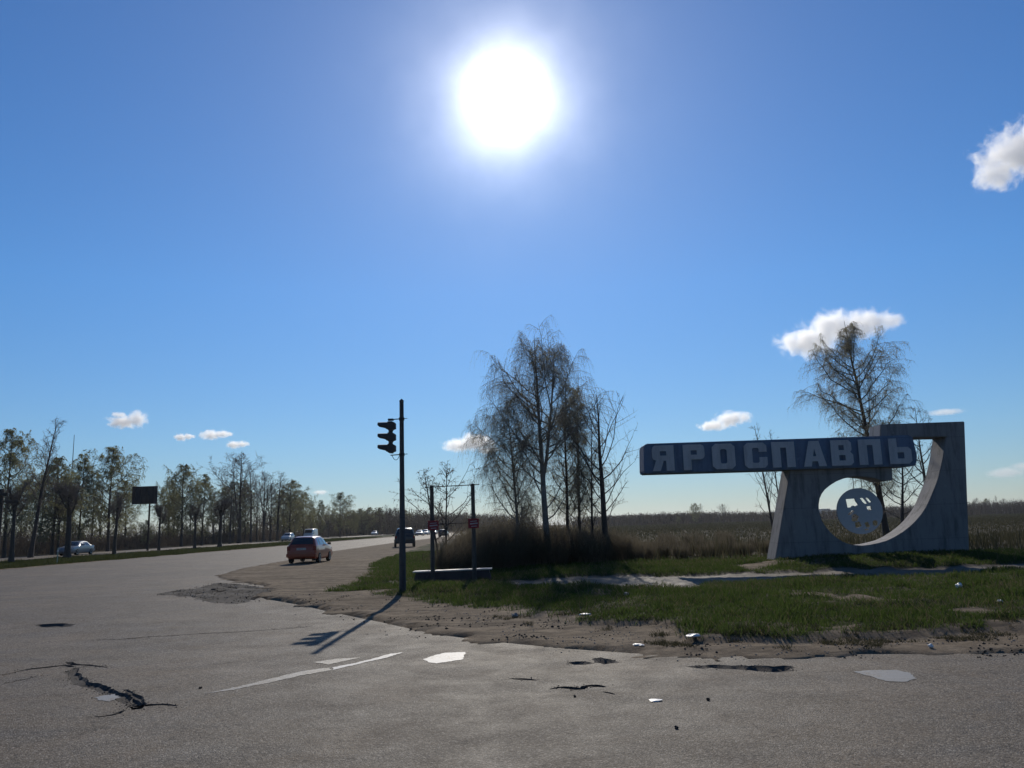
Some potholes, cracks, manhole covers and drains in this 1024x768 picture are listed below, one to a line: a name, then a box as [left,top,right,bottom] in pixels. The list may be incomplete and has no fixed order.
crack [5,662,179,717]
pothole [686,665,795,673]
crack [511,678,615,695]
